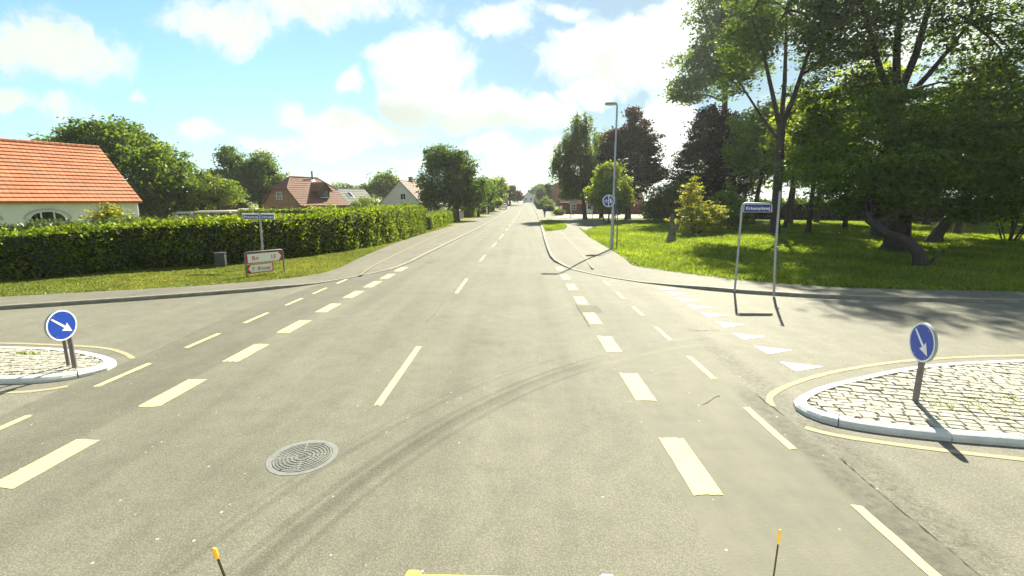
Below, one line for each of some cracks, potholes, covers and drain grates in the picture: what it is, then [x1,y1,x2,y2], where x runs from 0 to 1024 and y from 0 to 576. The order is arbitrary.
manhole cover [266,440,338,476]
